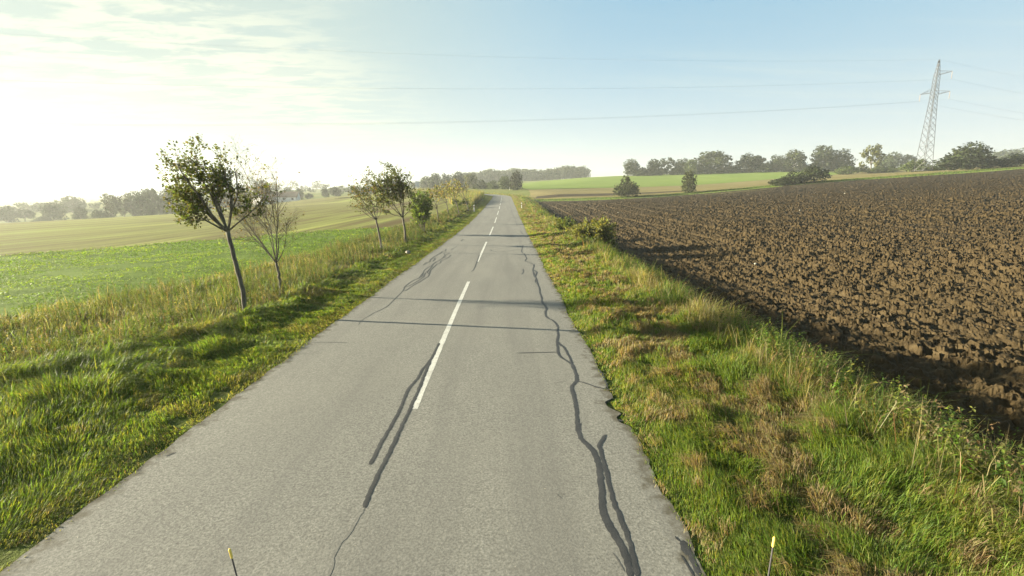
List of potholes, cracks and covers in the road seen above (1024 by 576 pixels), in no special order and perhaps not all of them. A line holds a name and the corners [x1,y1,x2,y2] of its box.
crack [327,509,364,576]
